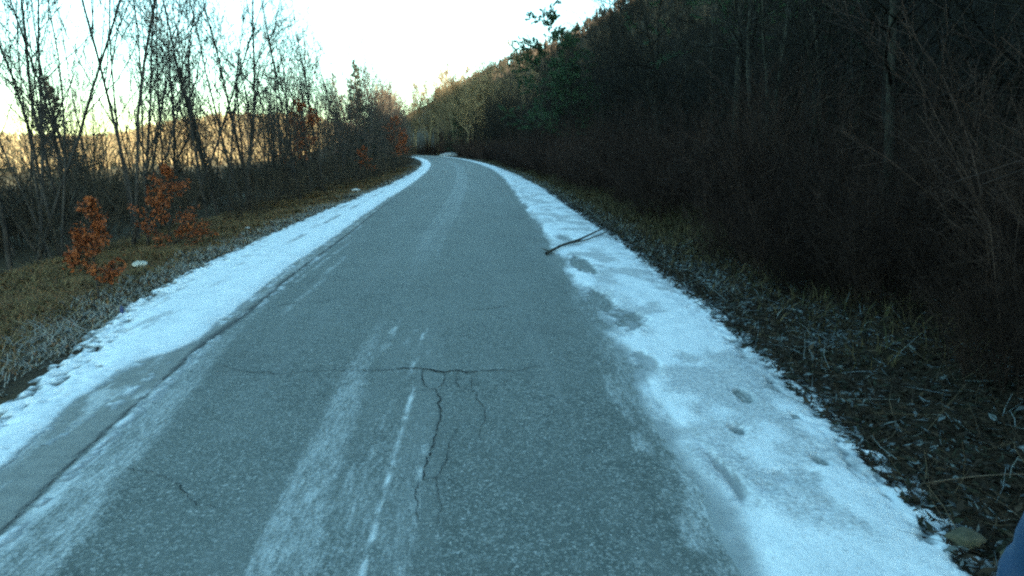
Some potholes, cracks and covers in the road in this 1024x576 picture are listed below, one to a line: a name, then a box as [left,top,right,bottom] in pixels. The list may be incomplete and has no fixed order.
crack [224,365,545,521]
crack [127,467,215,507]
